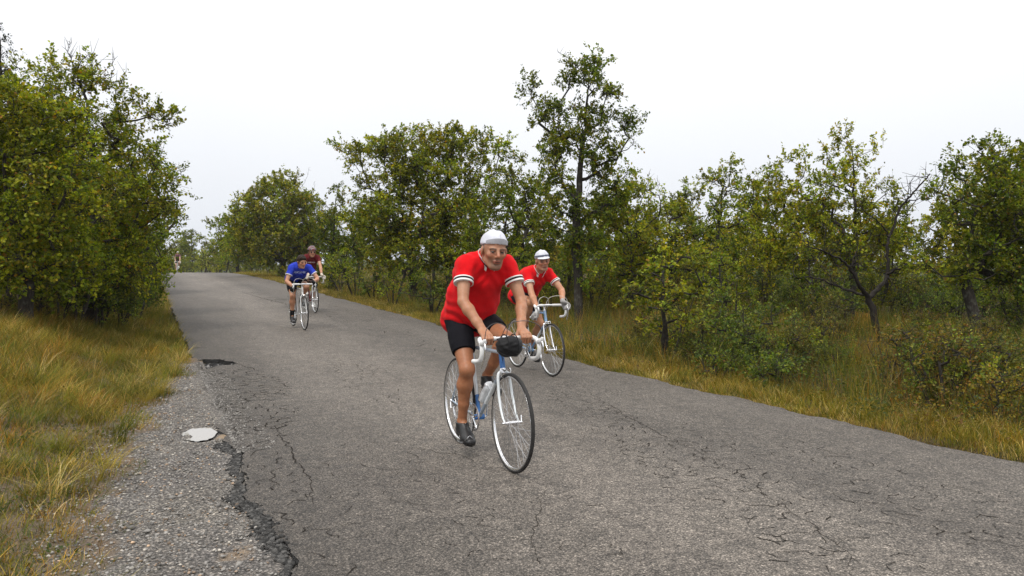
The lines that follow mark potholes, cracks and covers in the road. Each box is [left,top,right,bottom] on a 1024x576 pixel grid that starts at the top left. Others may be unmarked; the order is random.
pothole [198,358,238,369]
crack [204,364,641,575]
crack [544,385,1021,576]
